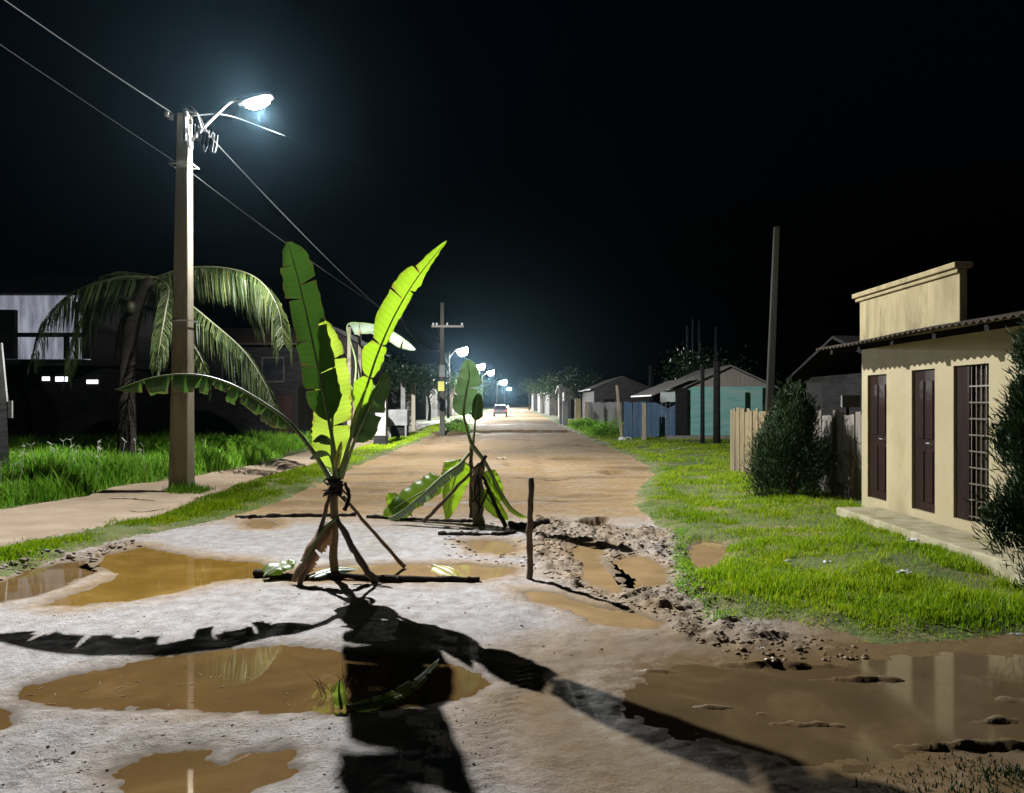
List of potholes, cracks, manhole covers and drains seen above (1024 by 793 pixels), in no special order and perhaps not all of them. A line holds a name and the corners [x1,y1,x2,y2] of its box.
pothole [519,590,672,630]
pothole [617,651,1024,772]
pothole [574,517,612,526]
pothole [466,537,519,555]
pothole [33,546,266,607]
pothole [3,643,492,716]
pothole [571,542,636,595]
pothole [608,553,670,589]
pothole [0,558,100,604]
pothole [686,539,728,568]
pothole [104,742,310,793]
